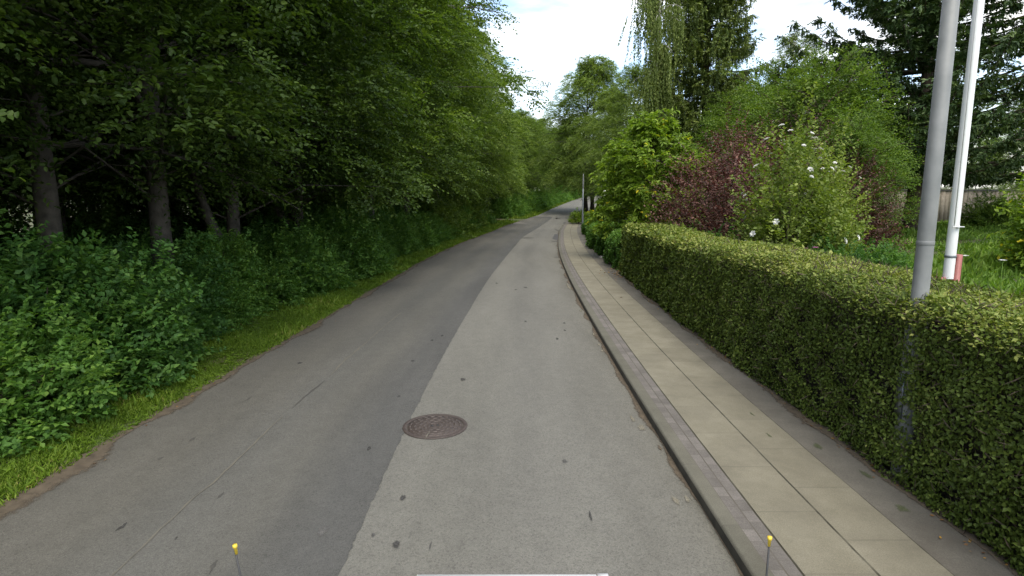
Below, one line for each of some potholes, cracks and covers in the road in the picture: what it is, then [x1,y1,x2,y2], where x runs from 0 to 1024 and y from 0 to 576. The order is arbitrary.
manhole cover [402,414,468,439]
